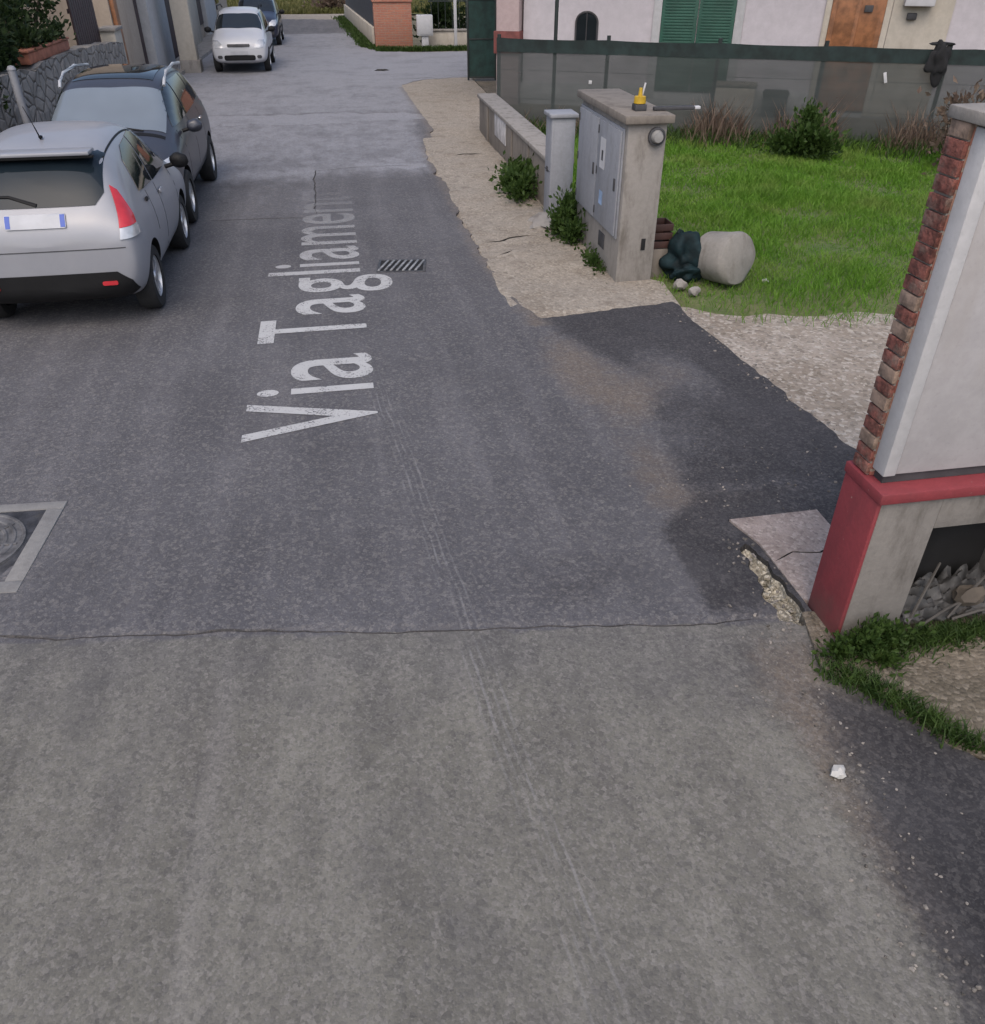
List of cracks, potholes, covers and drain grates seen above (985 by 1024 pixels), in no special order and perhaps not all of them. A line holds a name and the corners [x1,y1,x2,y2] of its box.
manhole cover [0,501,68,594]
crack [487,235,529,255]
pothole [740,544,805,626]
drain grate [376,259,426,273]
crack [313,166,372,214]
